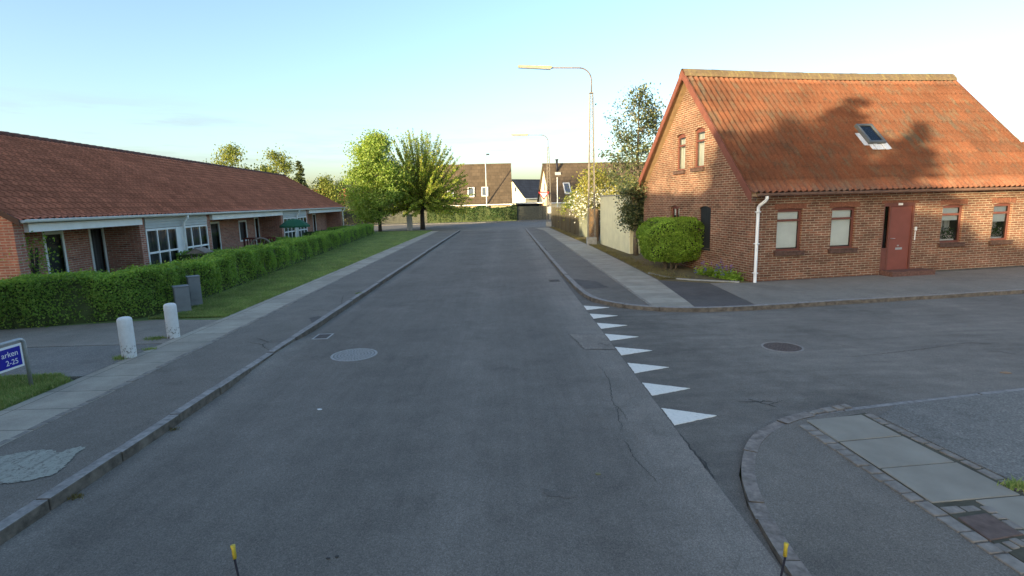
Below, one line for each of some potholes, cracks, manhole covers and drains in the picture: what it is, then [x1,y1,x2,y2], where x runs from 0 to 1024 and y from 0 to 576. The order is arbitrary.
crack [597,363,656,481]
manhole cover [761,342,804,352]
manhole cover [330,348,378,361]
